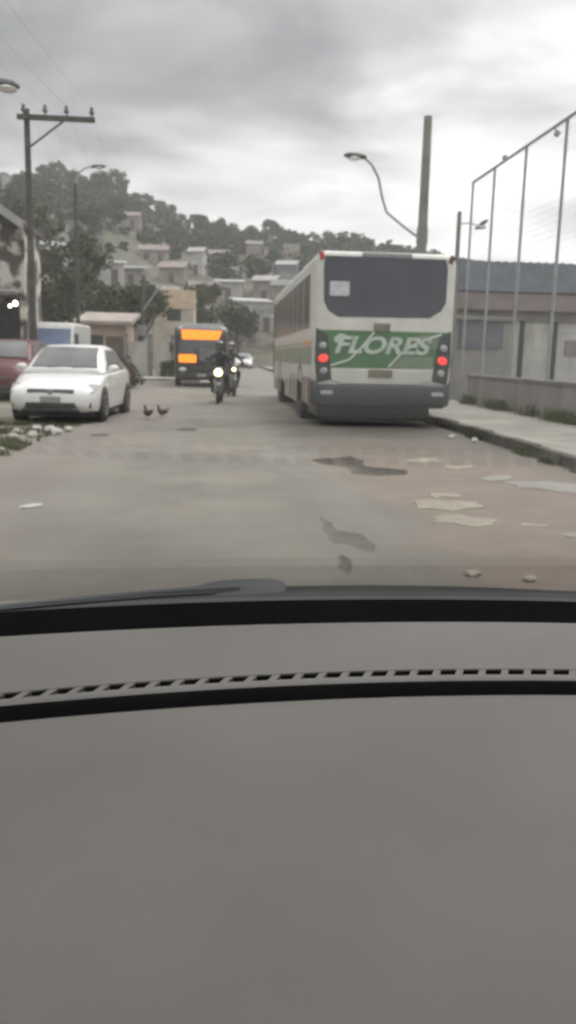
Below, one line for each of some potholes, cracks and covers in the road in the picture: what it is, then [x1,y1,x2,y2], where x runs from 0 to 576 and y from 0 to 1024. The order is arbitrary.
pothole [337,554,353,575]
pothole [319,517,376,553]
pothole [310,456,408,476]
